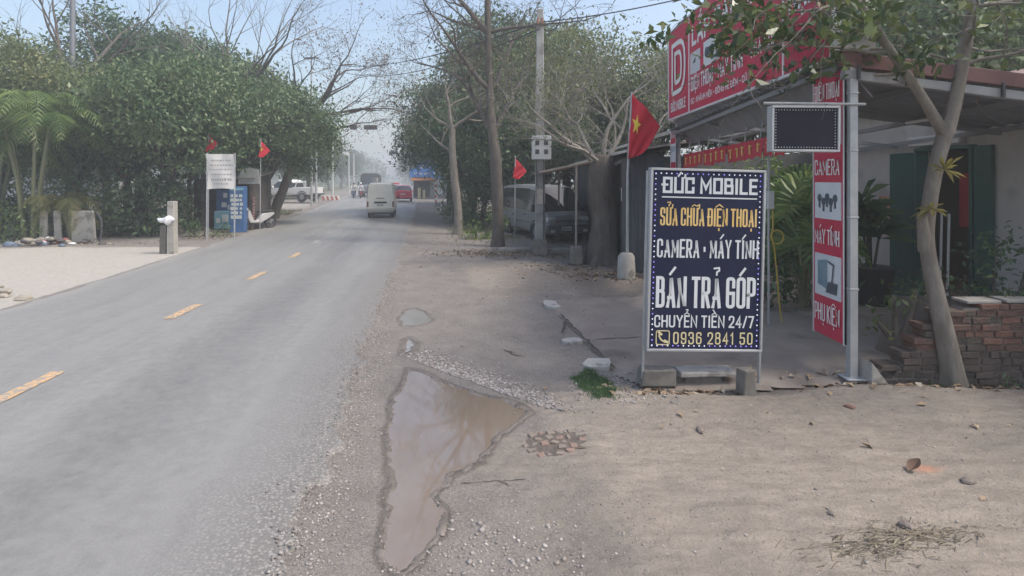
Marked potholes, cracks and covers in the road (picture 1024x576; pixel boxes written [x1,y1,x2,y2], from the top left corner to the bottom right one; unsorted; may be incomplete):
pothole [396,307,435,327]
pothole [377,368,533,575]
pothole [397,336,421,356]
crack [560,313,633,368]
